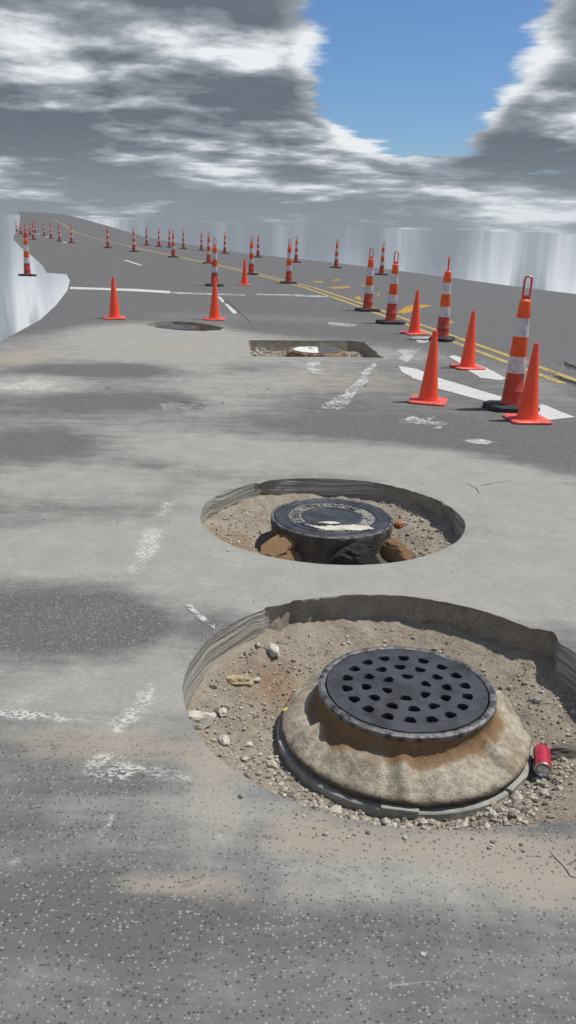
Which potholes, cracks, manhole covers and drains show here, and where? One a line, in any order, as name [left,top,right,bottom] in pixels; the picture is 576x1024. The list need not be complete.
pothole [182,594,576,831]
manhole cover [255,498,393,565]
pothole [200,478,466,558]
pothole [248,340,384,358]
